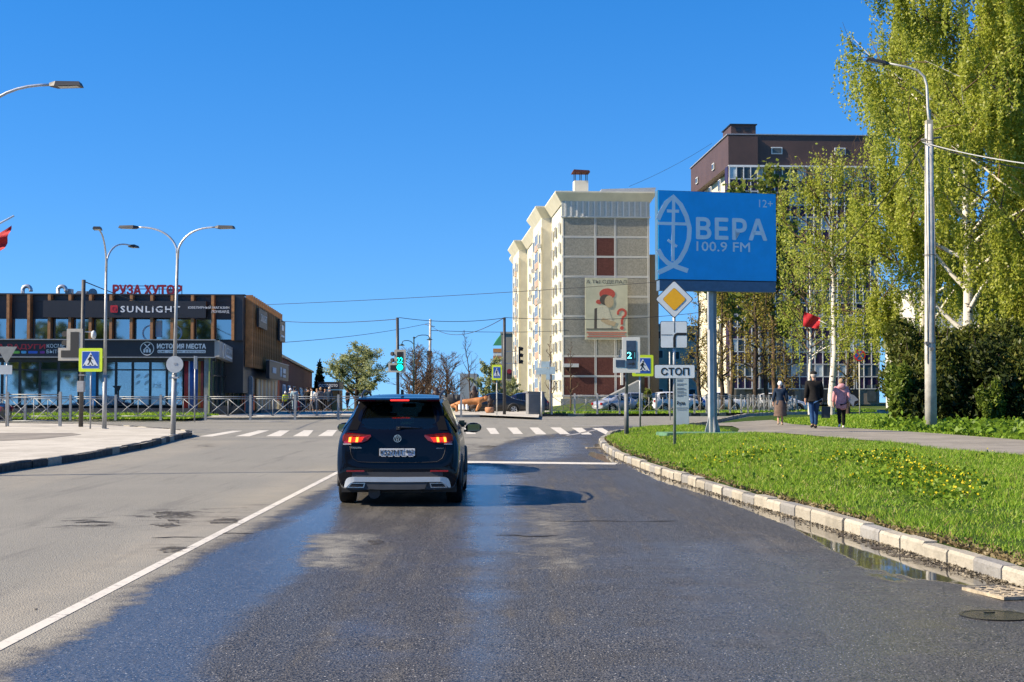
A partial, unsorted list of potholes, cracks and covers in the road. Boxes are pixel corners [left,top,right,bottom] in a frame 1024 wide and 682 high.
drain grate [962,585,1024,600]
manhole cover [958,610,1024,621]
